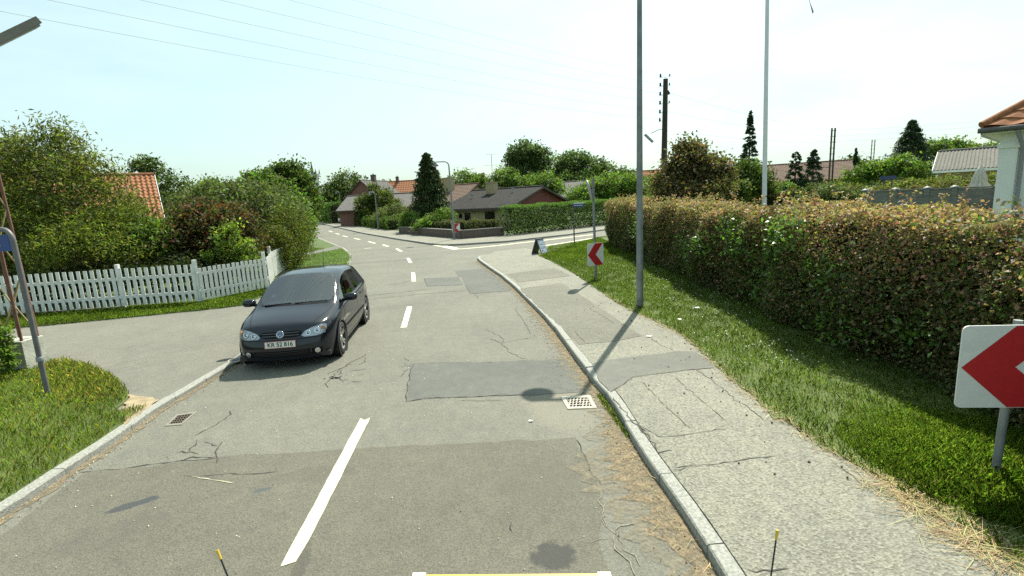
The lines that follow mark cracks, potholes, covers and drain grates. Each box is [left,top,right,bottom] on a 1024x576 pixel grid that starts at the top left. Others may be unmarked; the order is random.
drain grate [561,395,597,410]
crack [676,371,763,419]
crack [161,412,276,476]
drain grate [165,411,198,426]
